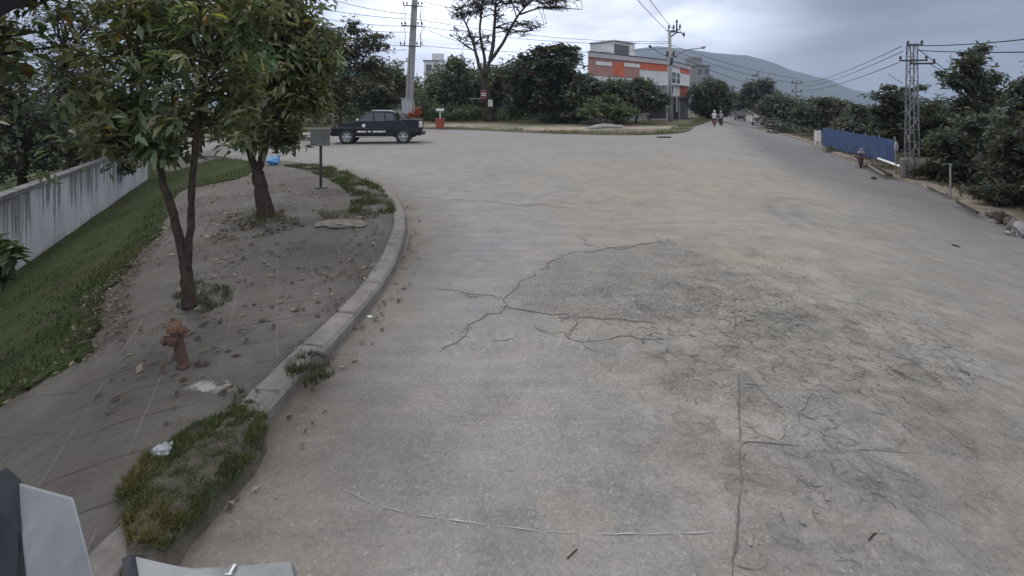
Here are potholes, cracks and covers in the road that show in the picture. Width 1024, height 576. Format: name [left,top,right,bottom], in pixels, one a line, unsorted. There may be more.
crack [413,187,595,209]
crack [737,299,1001,567]
crack [437,236,835,403]
